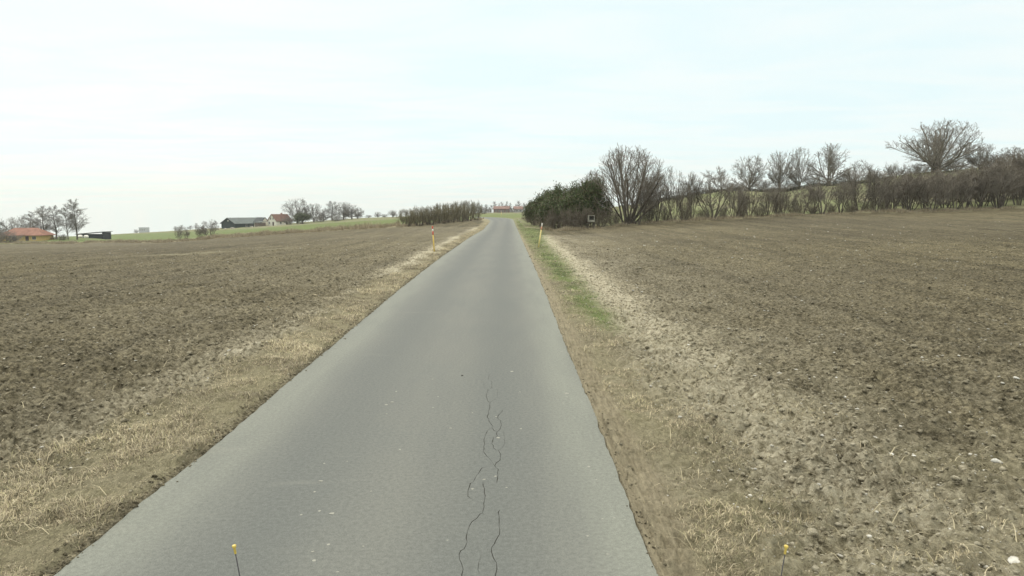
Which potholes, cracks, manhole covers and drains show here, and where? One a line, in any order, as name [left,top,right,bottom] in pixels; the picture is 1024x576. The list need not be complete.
crack [459,376,505,576]
